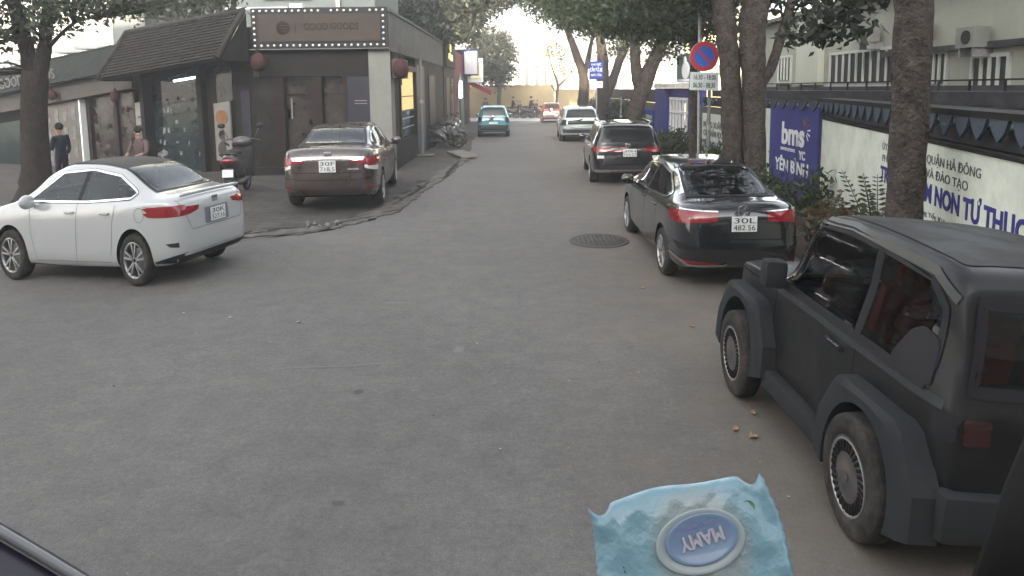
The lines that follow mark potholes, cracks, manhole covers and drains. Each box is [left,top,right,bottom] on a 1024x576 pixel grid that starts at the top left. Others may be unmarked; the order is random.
manhole cover [569,233,629,248]
